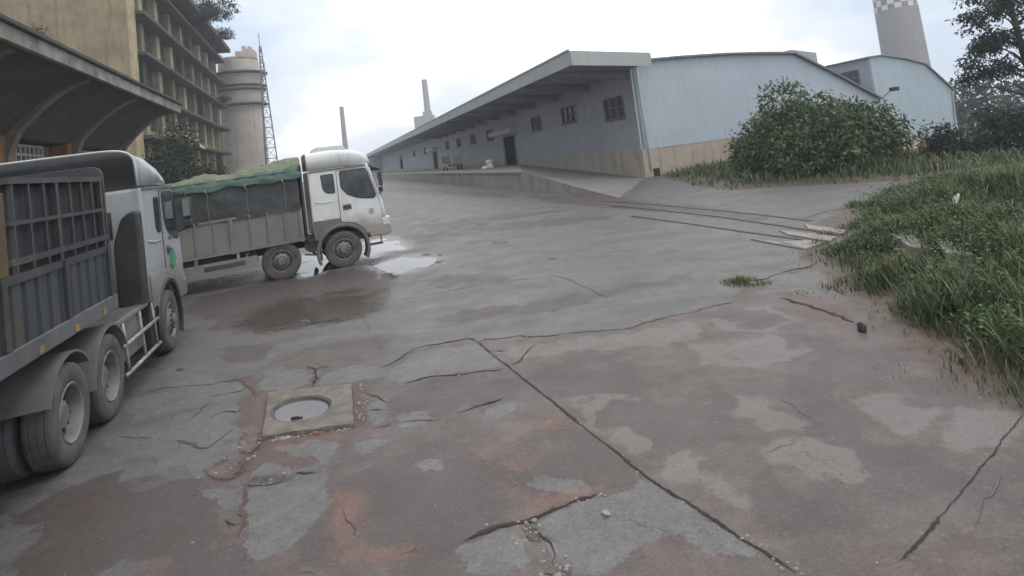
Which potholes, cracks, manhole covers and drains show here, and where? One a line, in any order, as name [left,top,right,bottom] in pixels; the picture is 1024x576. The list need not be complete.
crack [974,477,1000,532]
manhole cover [262,383,354,440]
crack [222,486,249,537]
crack [465,493,599,562]
crack [306,365,326,385]
pothole [204,459,243,480]
crack [360,301,731,383]
